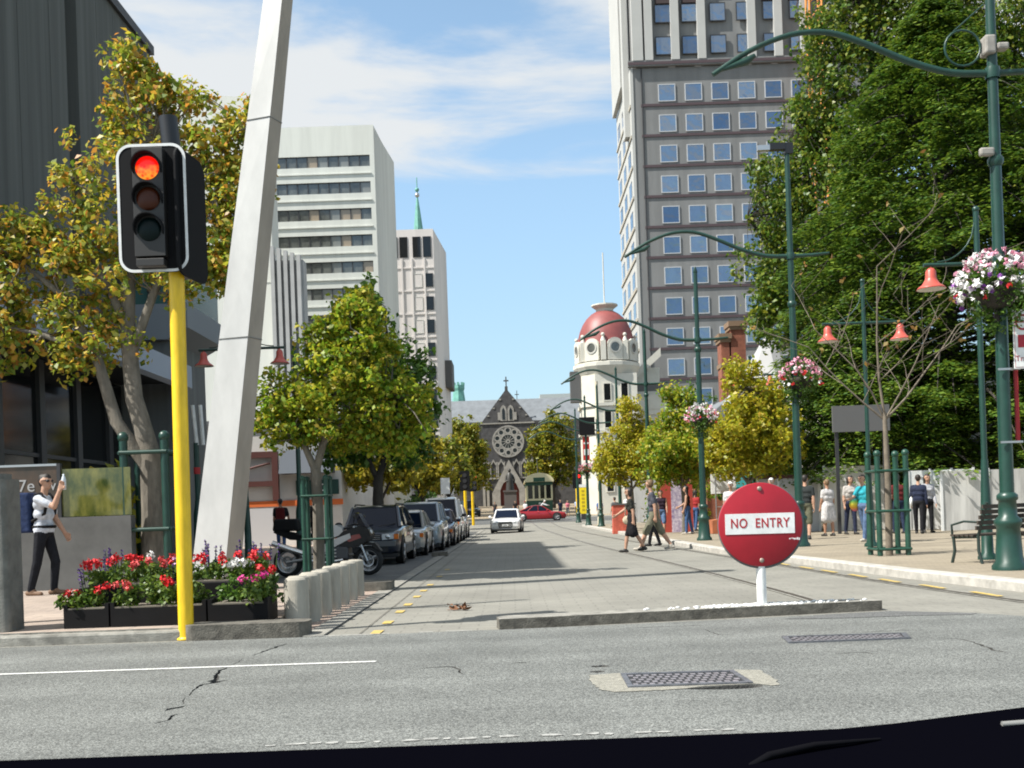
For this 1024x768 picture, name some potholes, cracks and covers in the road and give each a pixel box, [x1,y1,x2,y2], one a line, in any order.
manhole cover [589,669,780,692]
crack [940,637,1009,653]
crack [155,643,287,724]
